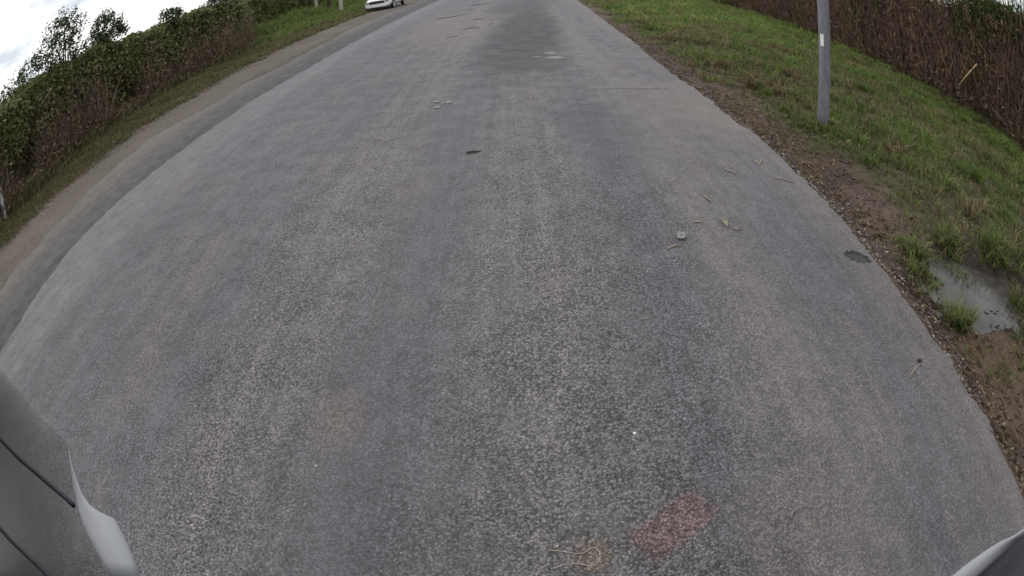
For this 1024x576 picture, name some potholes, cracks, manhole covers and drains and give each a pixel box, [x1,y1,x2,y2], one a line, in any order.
pothole [844,250,872,264]
